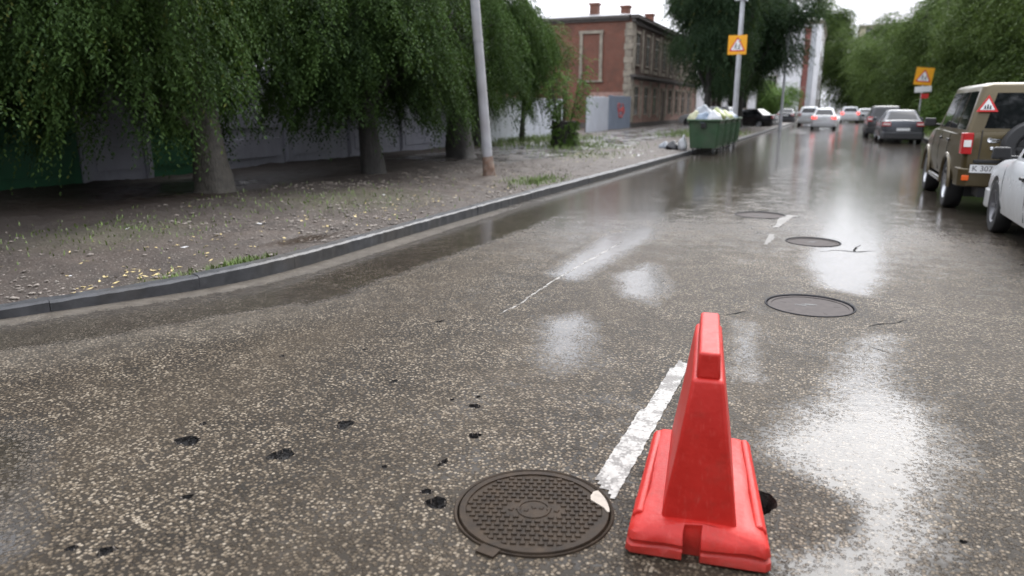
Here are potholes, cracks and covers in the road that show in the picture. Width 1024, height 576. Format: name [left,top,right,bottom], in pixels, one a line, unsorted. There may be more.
pothole [335,420,354,429]
manhole cover [785,237,841,247]
manhole cover [735,211,786,219]
manhole cover [764,294,857,317]
pothole [266,448,295,460]
pothole [759,490,777,515]
pothole [424,496,447,509]
pothole [174,436,202,446]
manhole cover [454,469,615,559]
pothole [95,546,119,557]
